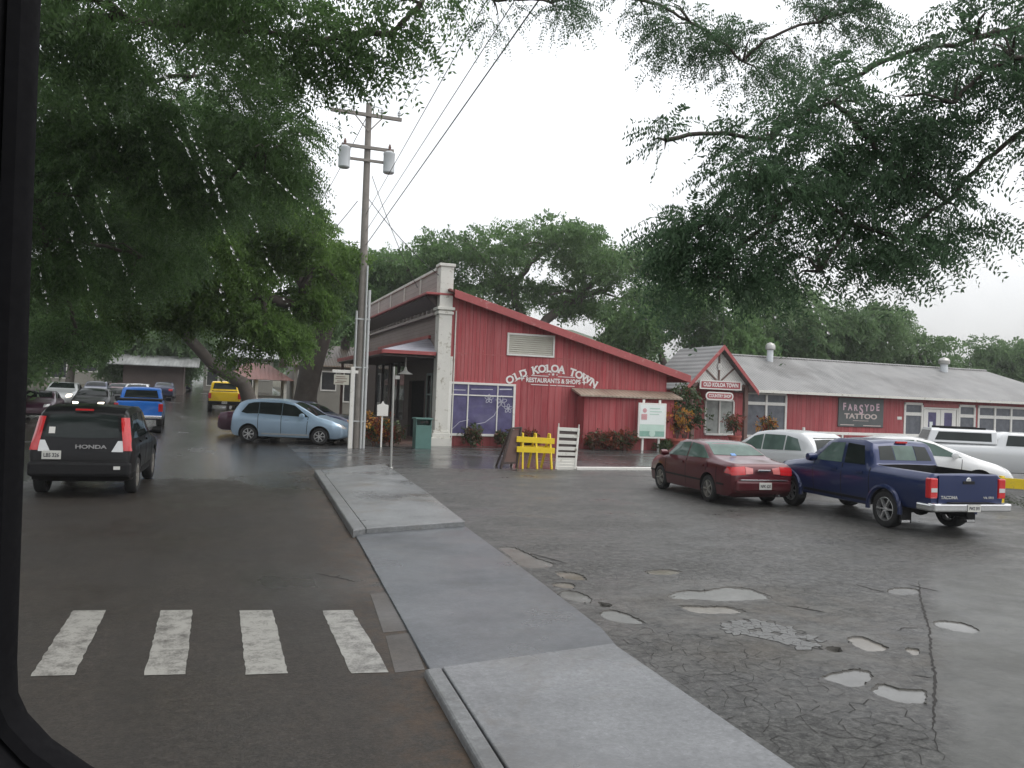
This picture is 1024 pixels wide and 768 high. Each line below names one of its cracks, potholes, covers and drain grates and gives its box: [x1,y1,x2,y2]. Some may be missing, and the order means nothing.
pothole [871,683,928,704]
pothole [847,636,889,652]
pothole [887,587,920,595]
pothole [679,605,746,614]
pothole [557,590,592,603]
pothole [599,609,645,624]
pothole [554,571,587,581]
pothole [498,546,556,569]
pothole [820,668,874,687]
crack [608,605,945,768]
pothole [933,620,979,633]
pothole [667,586,772,601]
